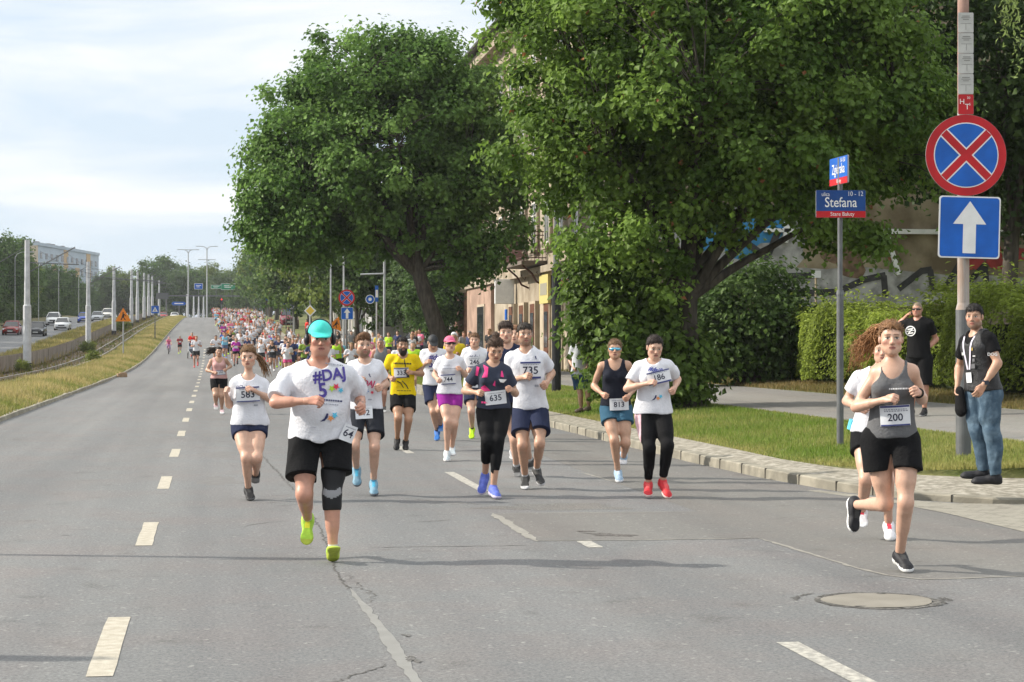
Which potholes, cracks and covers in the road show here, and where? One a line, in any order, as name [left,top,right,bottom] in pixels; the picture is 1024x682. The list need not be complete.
manhole cover [814,592,941,609]
crack [263,456,377,602]
